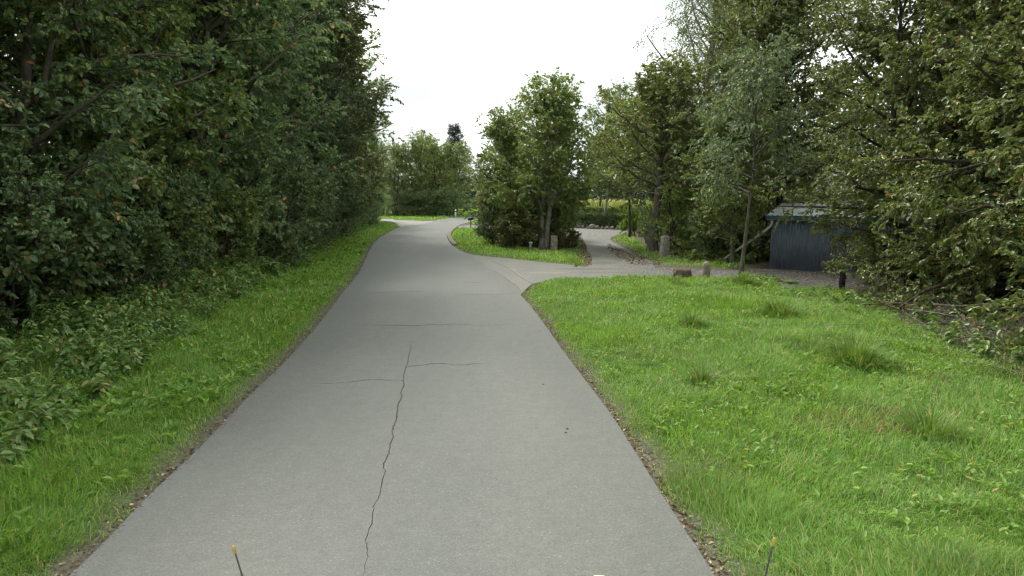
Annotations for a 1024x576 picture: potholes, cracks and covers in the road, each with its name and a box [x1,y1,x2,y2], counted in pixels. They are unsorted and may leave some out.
crack [327,345,486,569]
